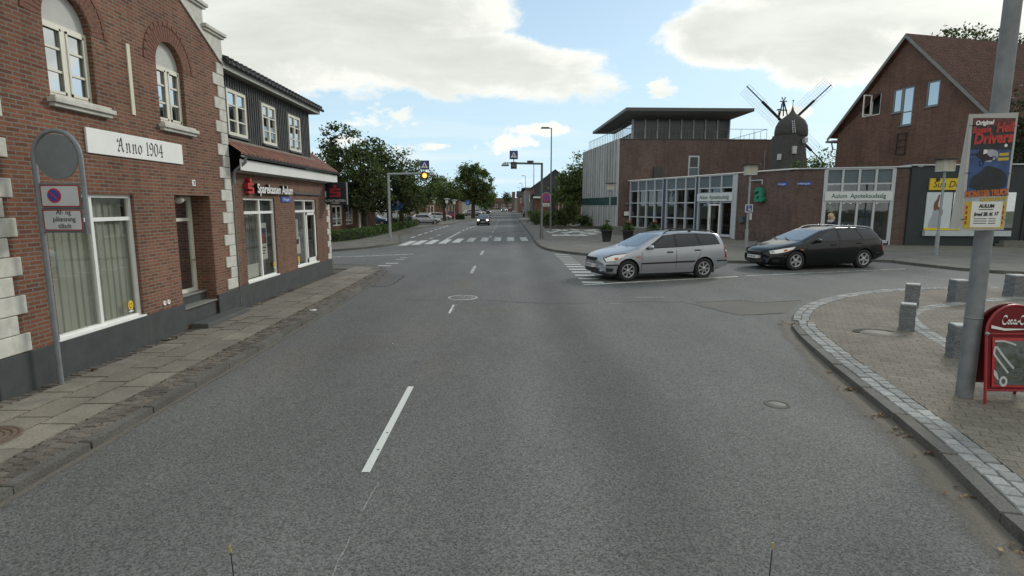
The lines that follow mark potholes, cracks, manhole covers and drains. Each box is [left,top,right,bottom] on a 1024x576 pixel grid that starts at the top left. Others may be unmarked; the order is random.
manhole cover [0,425,24,445]
manhole cover [858,329,900,337]
manhole cover [763,400,790,409]
